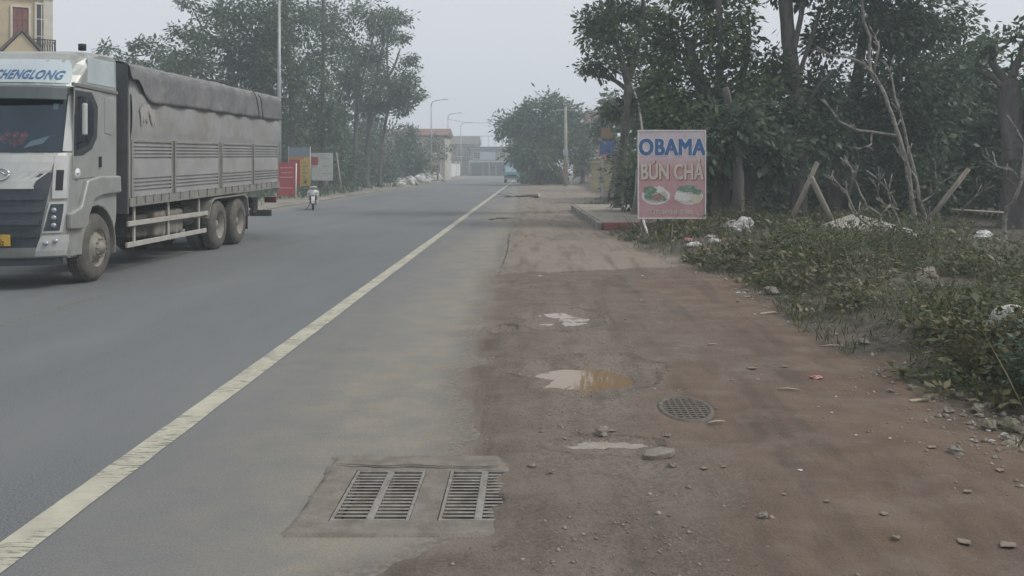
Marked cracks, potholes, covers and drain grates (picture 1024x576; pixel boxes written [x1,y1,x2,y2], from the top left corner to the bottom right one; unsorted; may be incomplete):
manhole cover [657,395,715,423]
pothole [486,323,520,333]
pothole [501,351,677,402]
drain grate [329,470,426,521]
pothole [535,433,673,457]
drain grate [438,470,510,521]
pothole [510,302,611,333]
